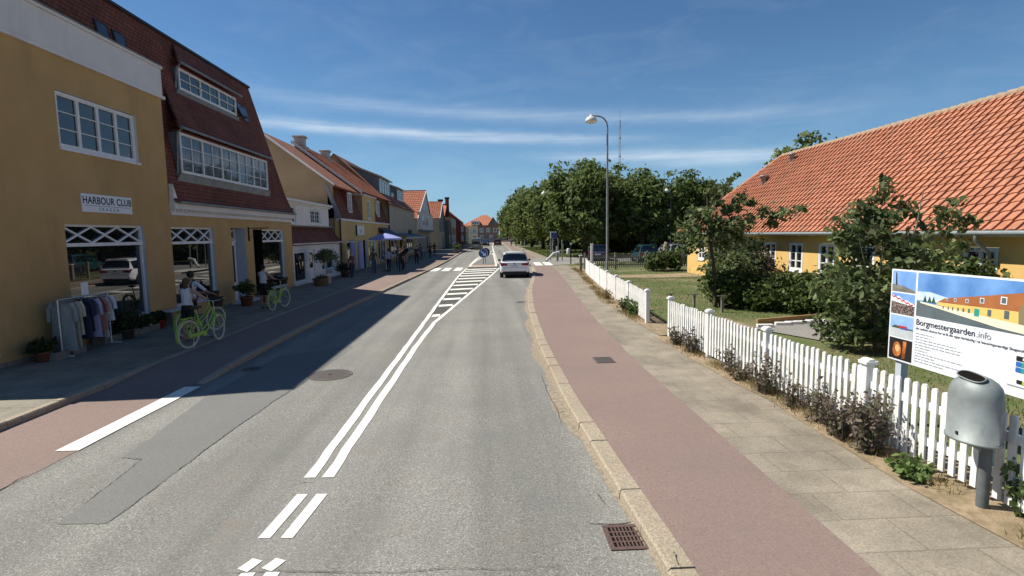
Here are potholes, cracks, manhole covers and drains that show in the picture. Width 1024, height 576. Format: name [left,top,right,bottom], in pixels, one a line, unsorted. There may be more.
drain grate [601,524,649,551]
manhole cover [307,369,353,381]
